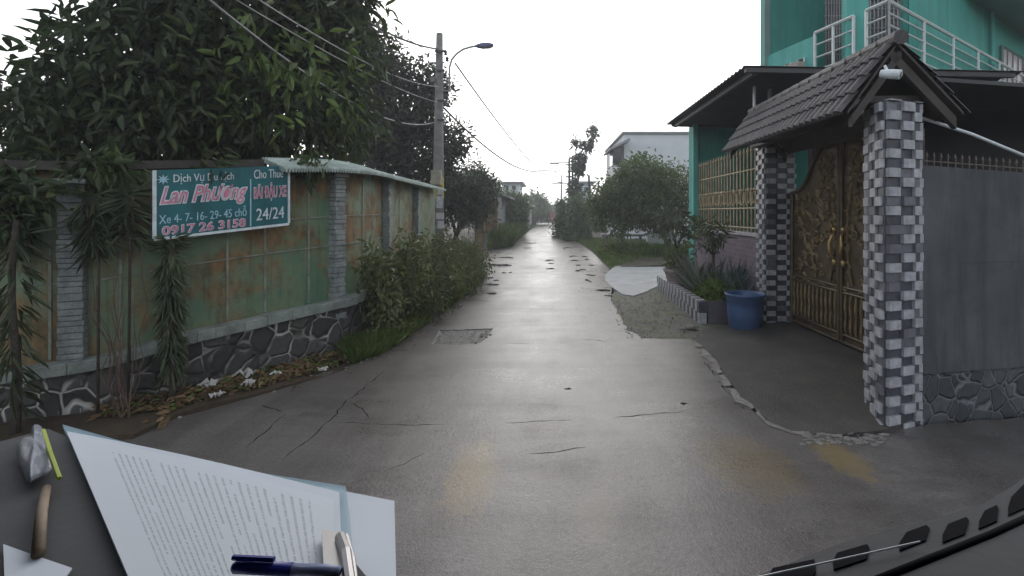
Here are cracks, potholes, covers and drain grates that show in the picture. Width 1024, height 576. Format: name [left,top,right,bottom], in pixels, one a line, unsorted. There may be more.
crack [245,370,384,454]
